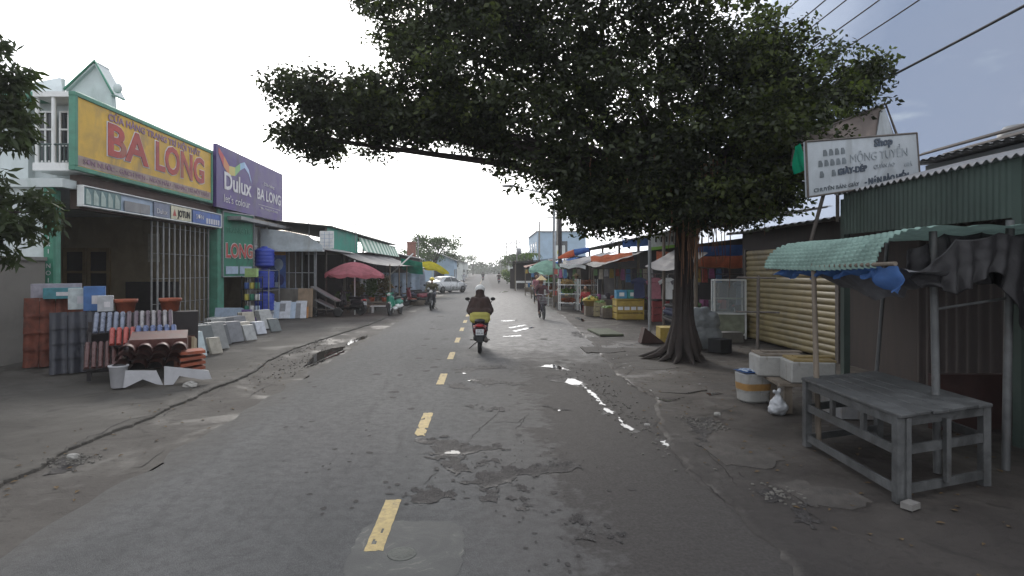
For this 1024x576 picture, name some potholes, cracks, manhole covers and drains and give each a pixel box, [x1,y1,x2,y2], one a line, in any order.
crack [80,366,272,441]
pothole [43,458,85,475]
crack [653,406,751,519]
